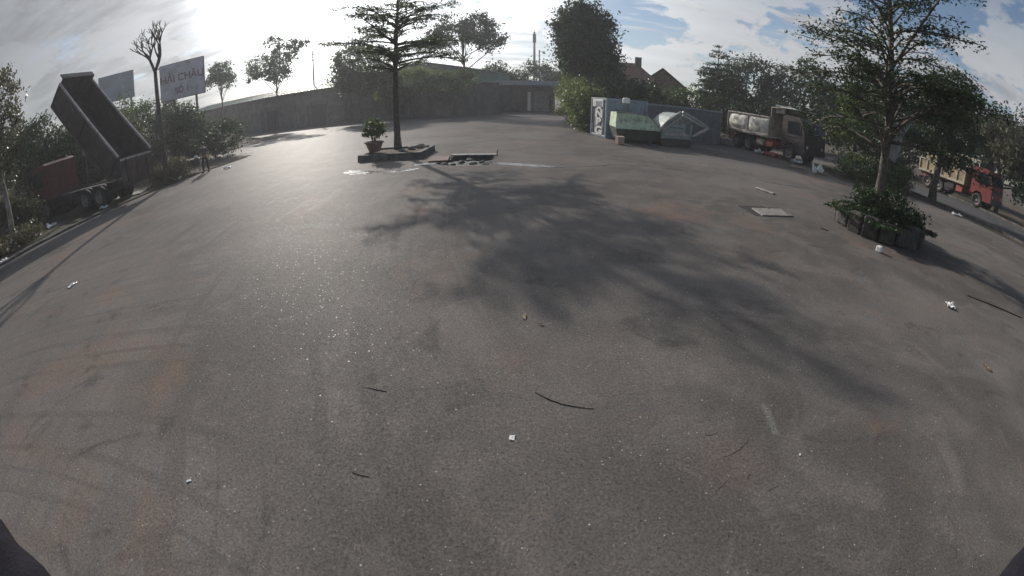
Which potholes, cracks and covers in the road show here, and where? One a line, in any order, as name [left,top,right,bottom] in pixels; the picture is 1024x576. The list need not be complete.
pothole [436,156,497,166]
manhole cover [739,205,794,217]
